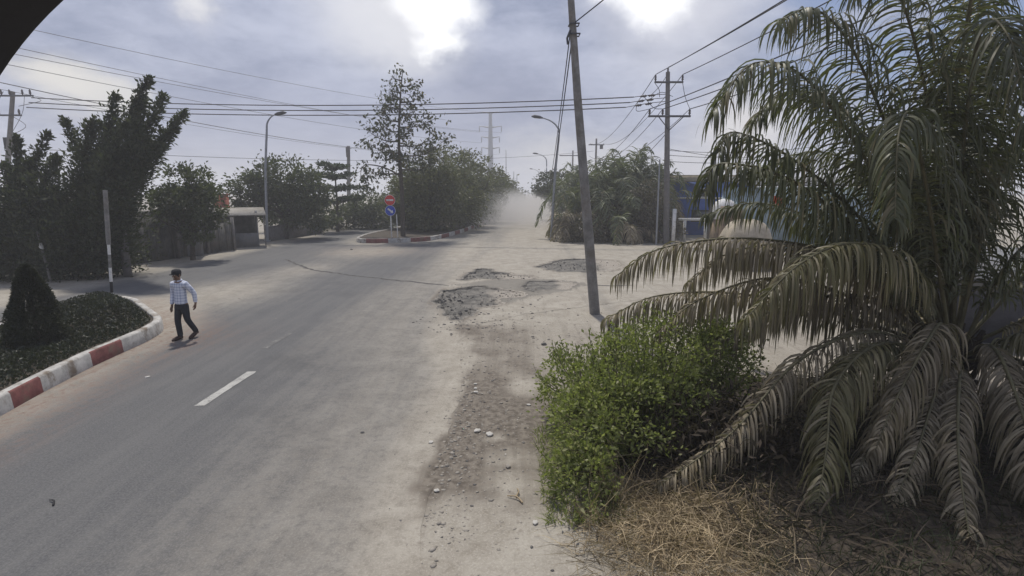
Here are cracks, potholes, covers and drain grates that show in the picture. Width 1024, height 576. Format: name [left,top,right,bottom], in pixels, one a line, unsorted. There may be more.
pothole [429,285,528,320]
pothole [520,280,577,292]
pothole [458,268,536,281]
crack [284,259,449,286]
pothole [534,258,625,273]
